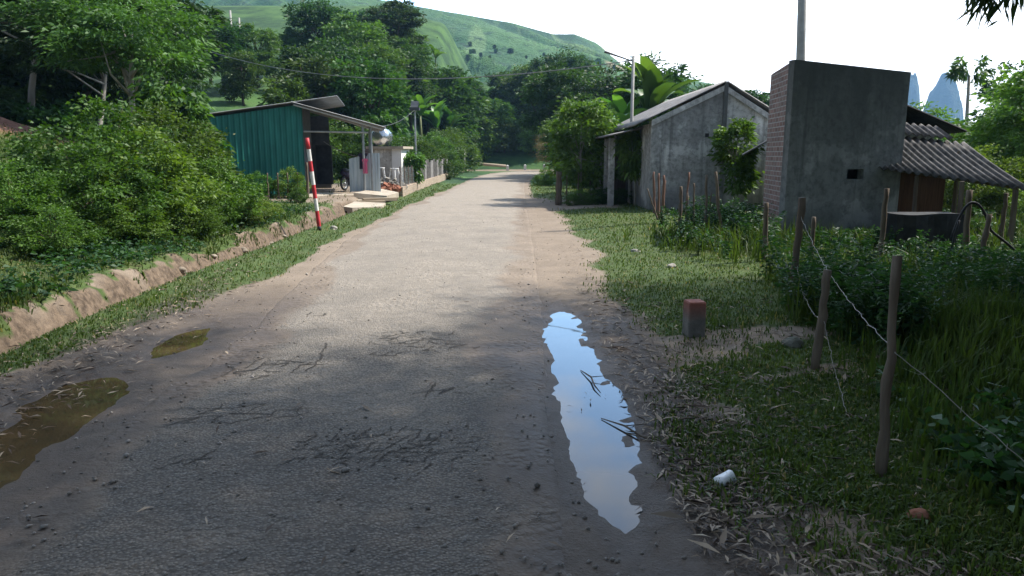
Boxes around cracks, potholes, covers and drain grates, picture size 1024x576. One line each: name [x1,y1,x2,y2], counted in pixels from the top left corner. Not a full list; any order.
crack [368,331,480,356]
crack [166,403,308,425]
crack [153,449,216,468]
crack [294,425,484,469]
crack [215,343,327,380]
